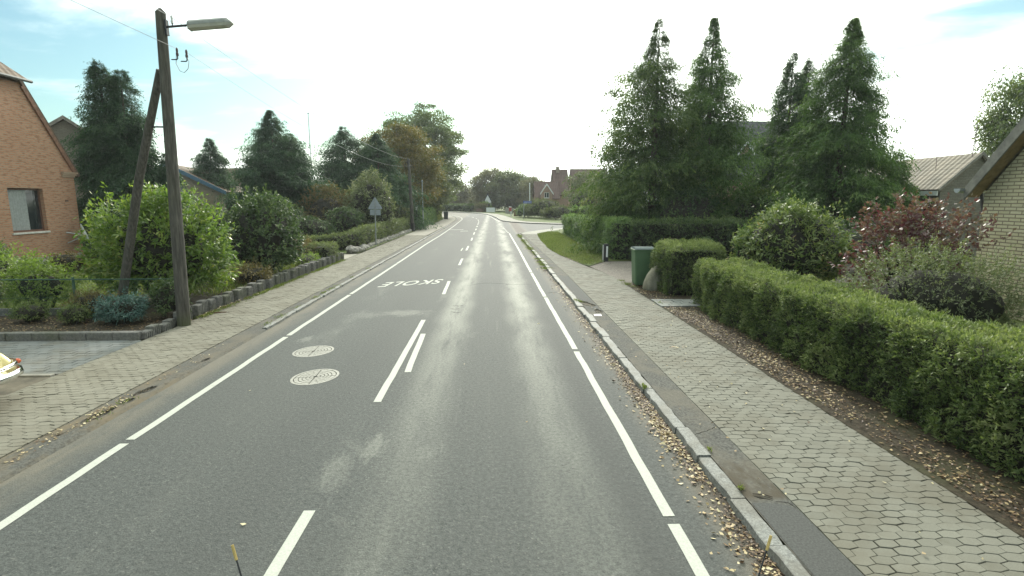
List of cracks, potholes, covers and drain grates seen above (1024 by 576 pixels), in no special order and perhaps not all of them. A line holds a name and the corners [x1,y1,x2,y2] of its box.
manhole cover [292,346,334,357]
manhole cover [290,369,339,385]
